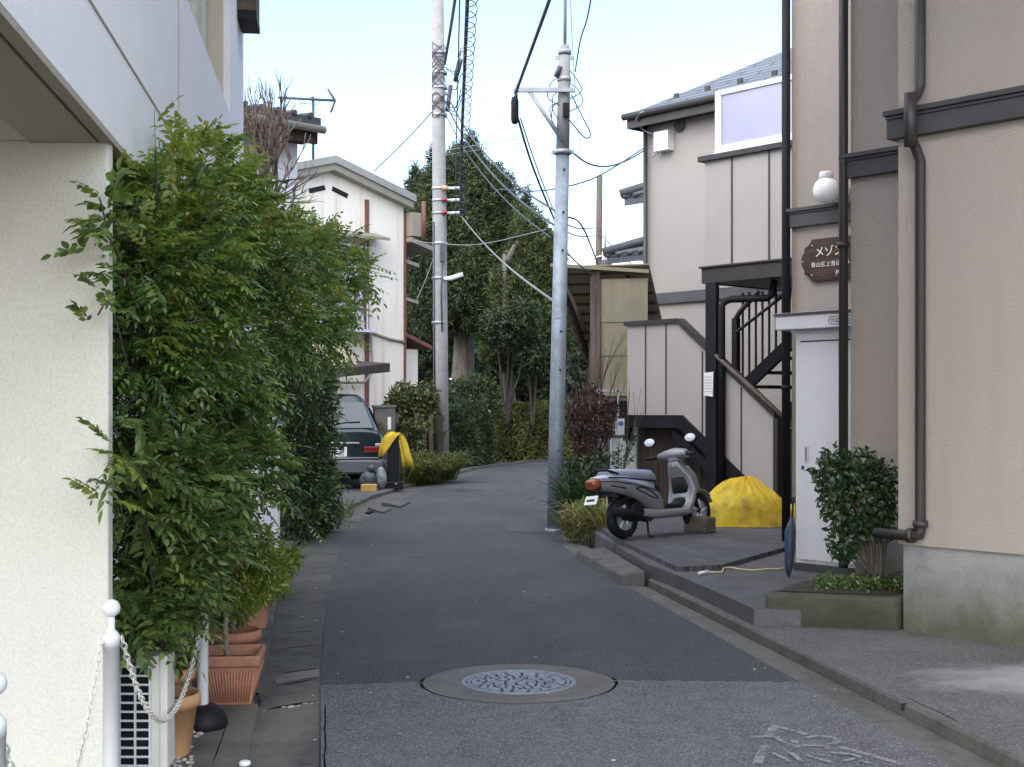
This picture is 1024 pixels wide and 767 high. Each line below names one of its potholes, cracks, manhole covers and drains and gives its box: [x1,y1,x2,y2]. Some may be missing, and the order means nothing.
crack [901,698,957,722]
manhole cover [461,670,576,694]
